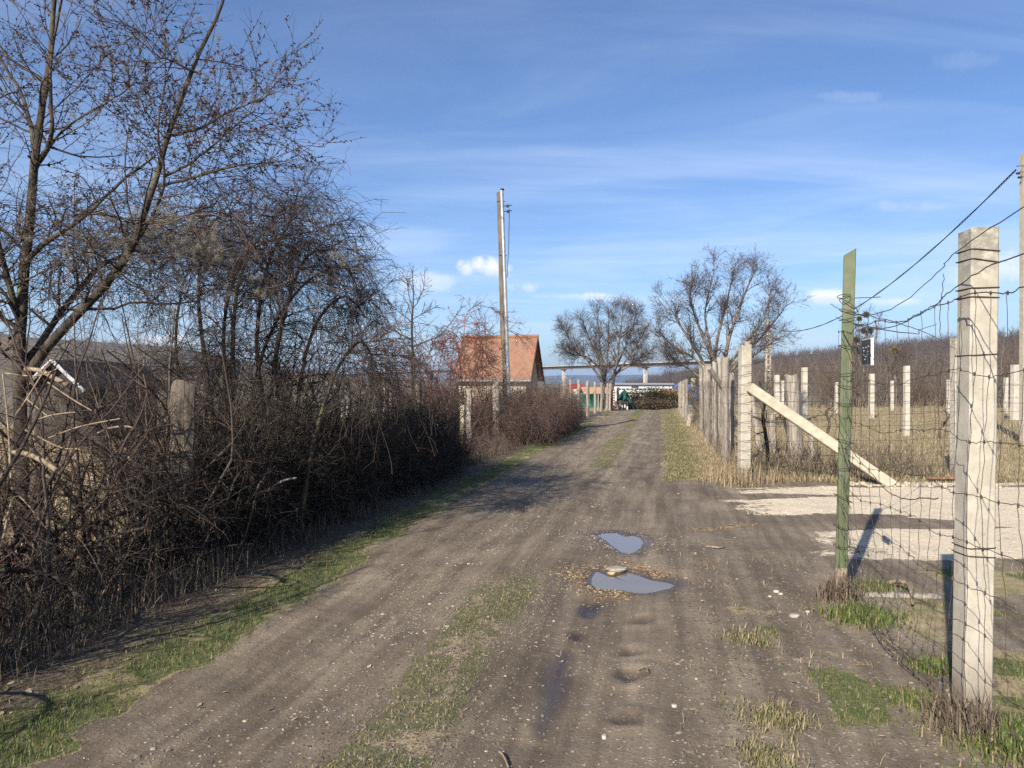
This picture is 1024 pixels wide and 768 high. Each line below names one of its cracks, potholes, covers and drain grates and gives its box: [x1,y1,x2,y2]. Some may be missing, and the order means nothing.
pothole [613,666,651,683]
pothole [579,604,604,618]
pothole [595,532,647,553]
pothole [585,568,680,594]
